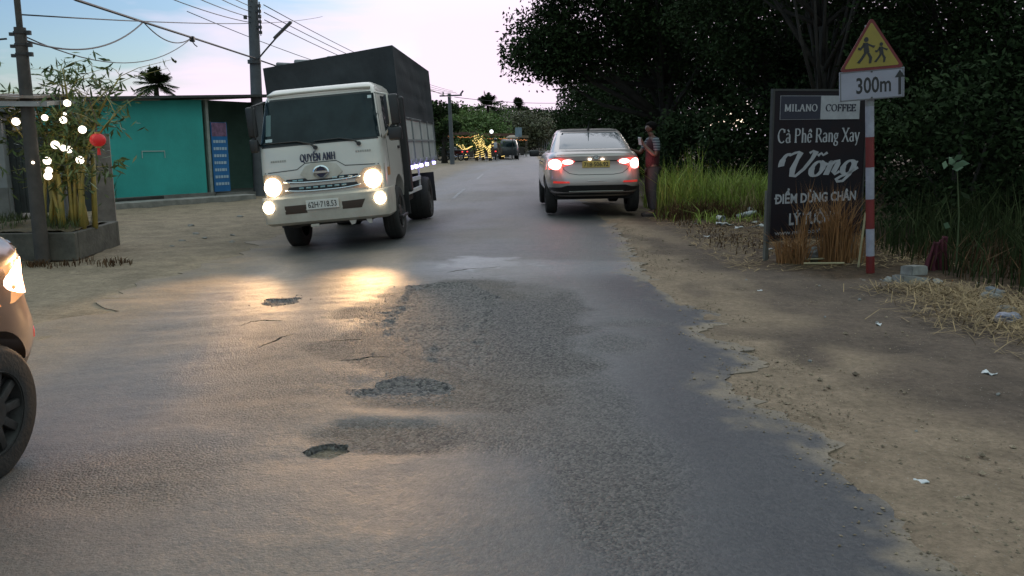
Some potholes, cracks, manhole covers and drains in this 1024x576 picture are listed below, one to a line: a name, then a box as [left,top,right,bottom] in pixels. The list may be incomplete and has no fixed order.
crack [242,320,292,348]
pothole [249,295,311,308]
crack [338,339,370,361]
pothole [329,376,455,408]
pothole [302,444,350,459]
